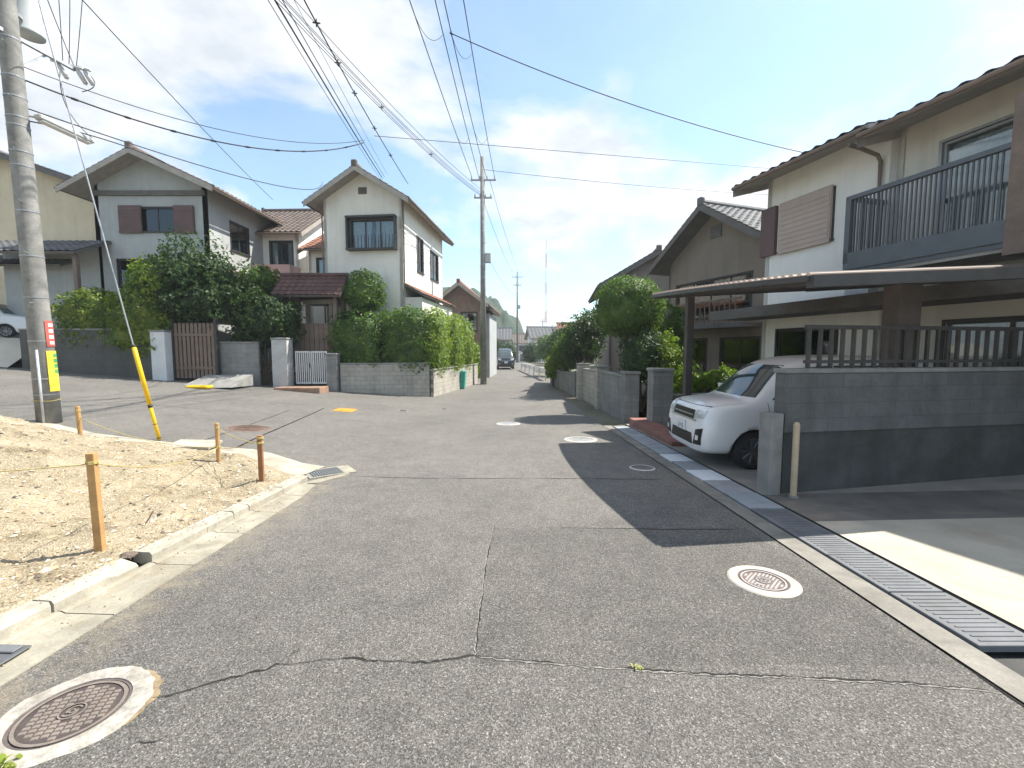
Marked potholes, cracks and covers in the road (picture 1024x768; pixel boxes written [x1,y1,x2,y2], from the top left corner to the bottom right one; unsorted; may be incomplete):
drain grate [305,465,357,479]
crack [152,521,1024,706]
manhole cover [727,565,803,598]
manhole cover [0,666,155,768]
